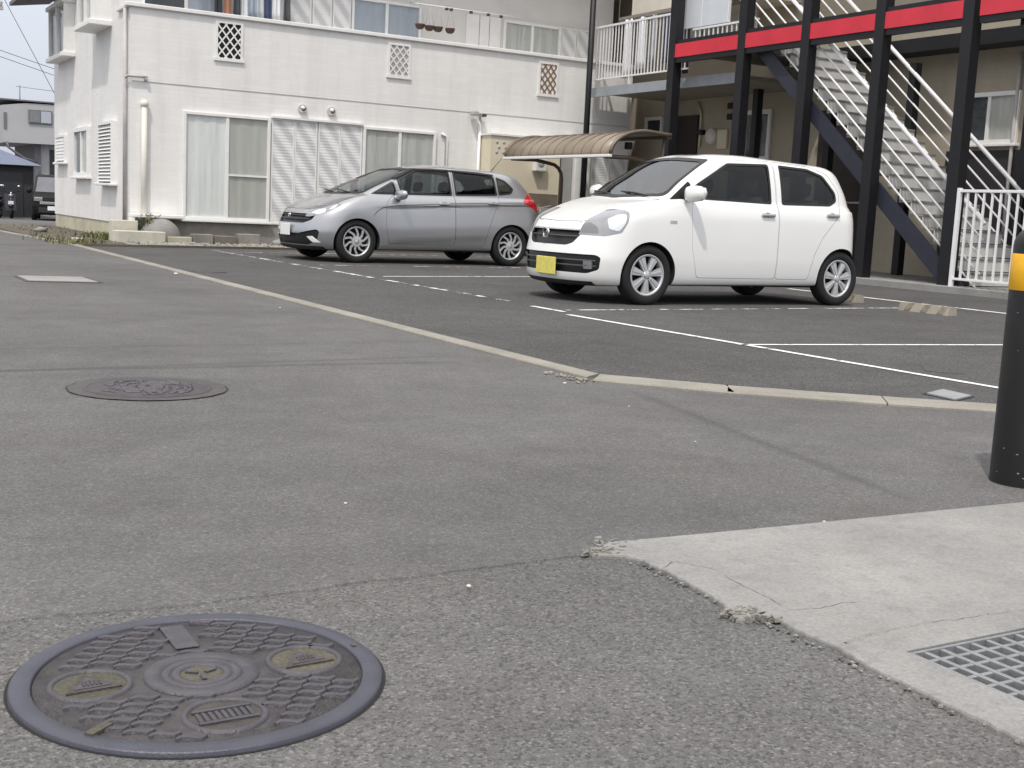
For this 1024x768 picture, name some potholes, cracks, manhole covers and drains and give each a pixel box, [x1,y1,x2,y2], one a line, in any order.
manhole cover [65,377,228,400]
utility cover [923,389,974,401]
drain grate [911,630,1024,702]
manhole cover [14,275,103,283]
manhole cover [3,613,386,759]
